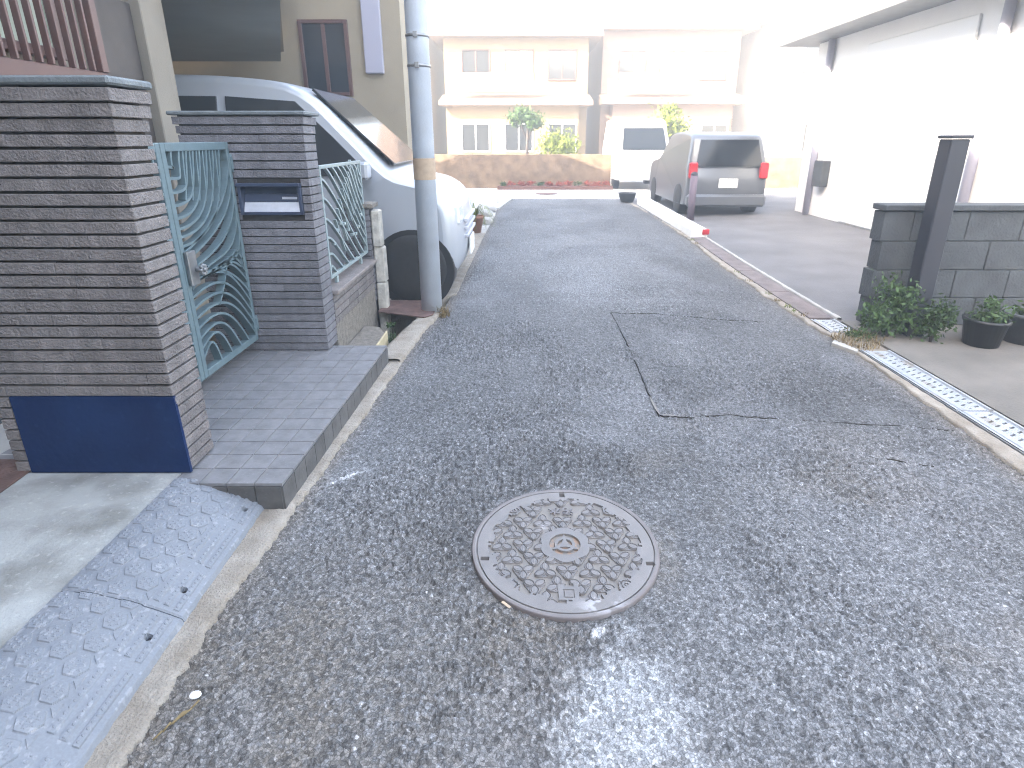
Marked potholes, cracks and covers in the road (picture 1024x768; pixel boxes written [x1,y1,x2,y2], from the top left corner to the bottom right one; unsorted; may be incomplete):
drain grate [860,350,995,417]
manhole cover [472,490,660,623]
drain grate [810,319,852,333]
drain grate [956,411,1024,455]
